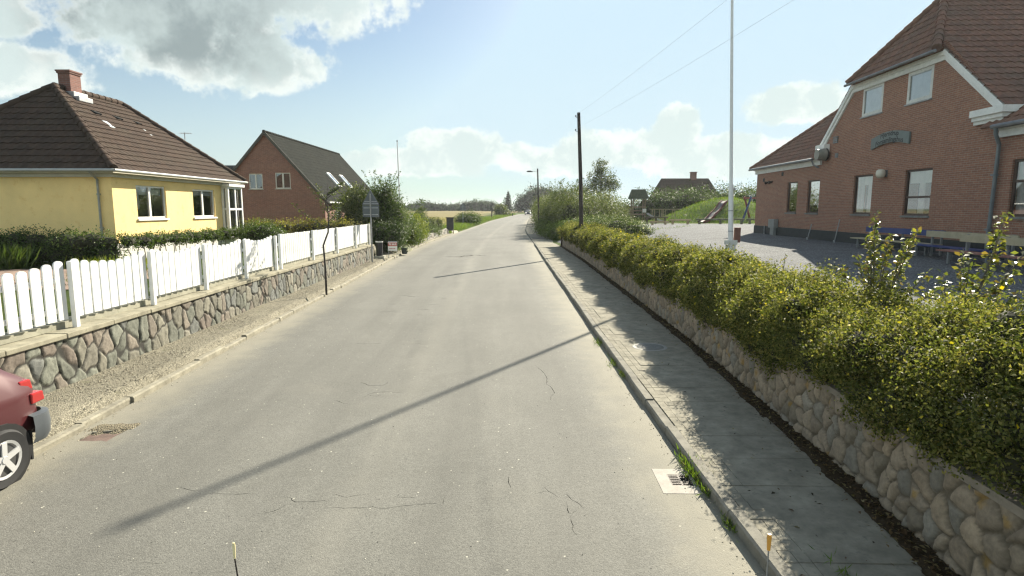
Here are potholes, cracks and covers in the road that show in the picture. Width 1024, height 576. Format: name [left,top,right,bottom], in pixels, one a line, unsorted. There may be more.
drain grate [652,469,703,494]
manhole cover [632,343,667,351]
